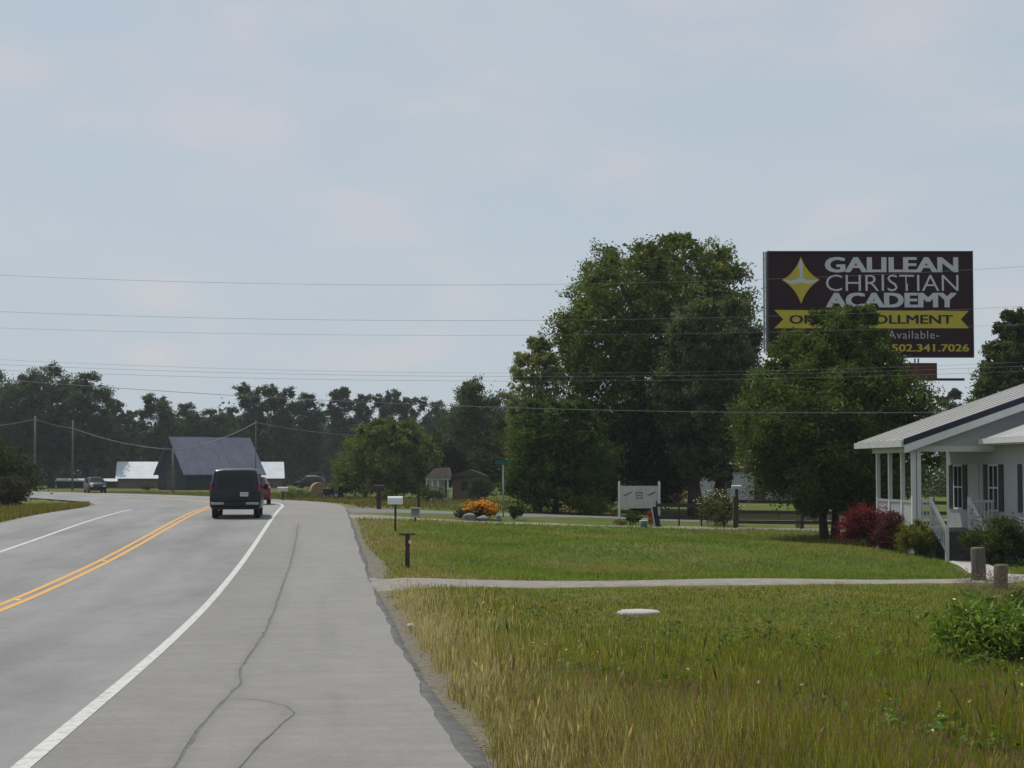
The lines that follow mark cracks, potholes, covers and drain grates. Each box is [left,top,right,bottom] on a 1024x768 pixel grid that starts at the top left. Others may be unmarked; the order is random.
crack [173,523,299,768]
